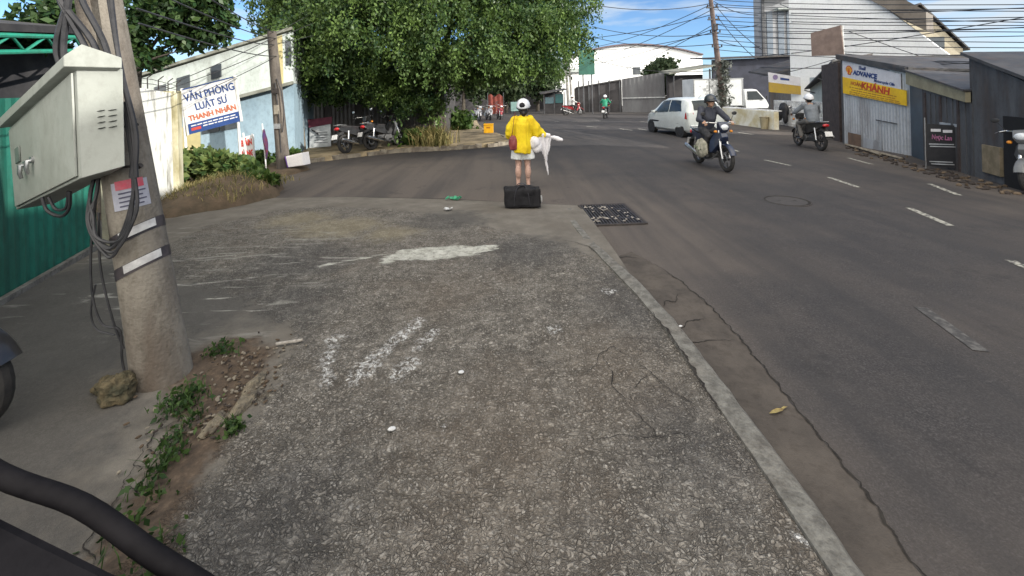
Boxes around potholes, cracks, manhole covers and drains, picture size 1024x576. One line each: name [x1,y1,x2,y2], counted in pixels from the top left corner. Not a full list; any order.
drain grate [578,203,648,227]
manhole cover [762,195,813,207]
crack [586,264,927,576]
